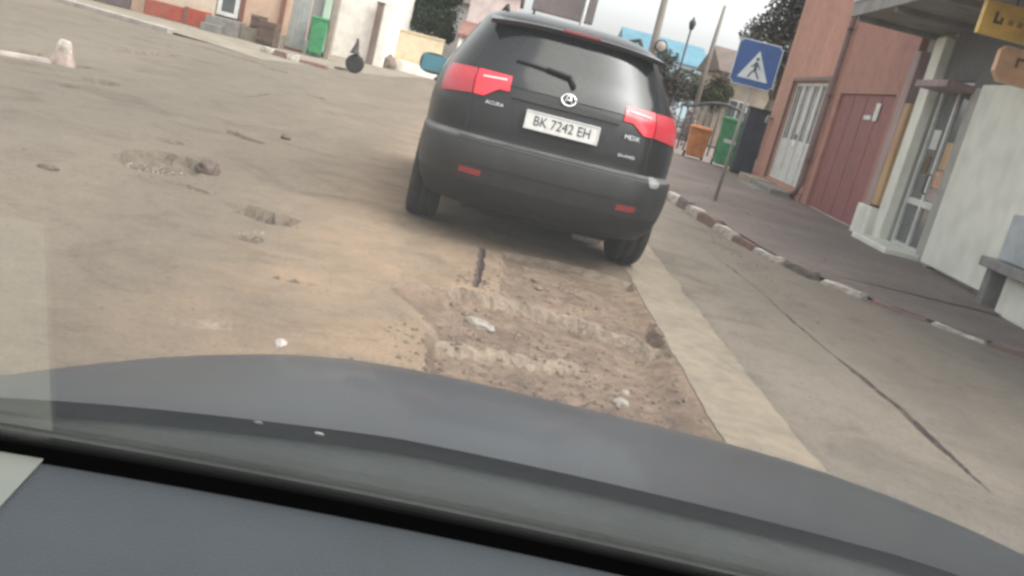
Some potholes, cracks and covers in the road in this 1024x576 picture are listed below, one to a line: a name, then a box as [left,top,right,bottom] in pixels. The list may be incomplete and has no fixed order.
pothole [232,233,264,244]
crack [709,252,992,493]
pothole [223,202,303,228]
pothole [111,150,201,176]
pothole [391,252,723,442]
